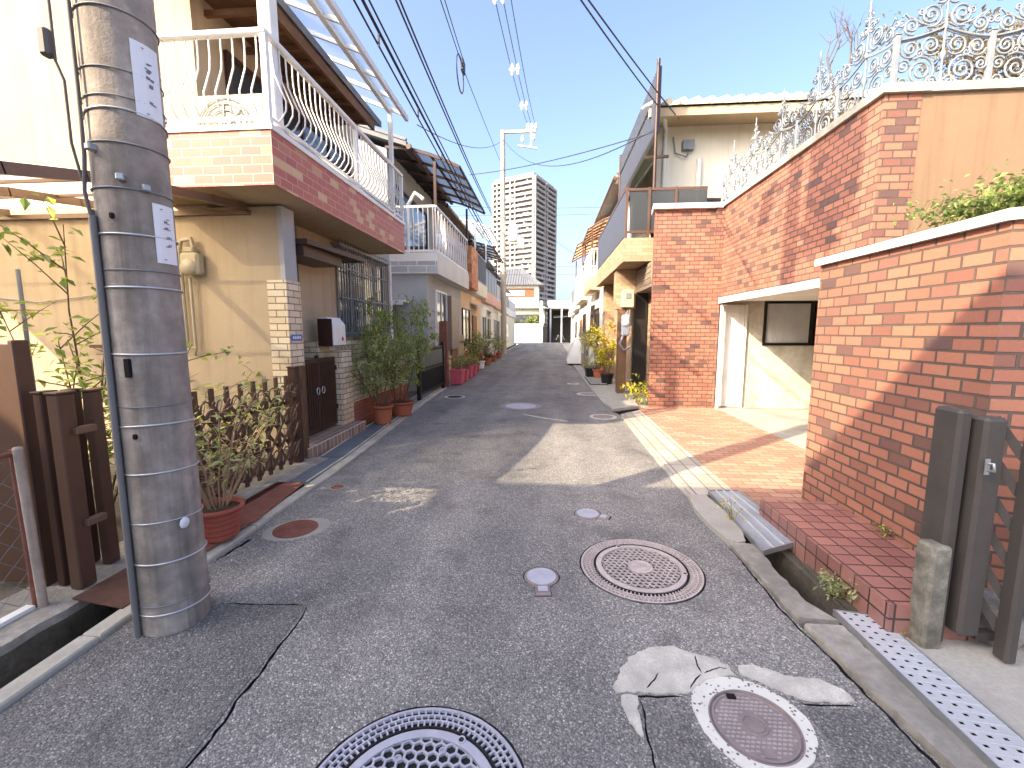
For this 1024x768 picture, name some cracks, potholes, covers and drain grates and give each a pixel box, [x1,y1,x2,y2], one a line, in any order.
drain grate [708,489,794,555]
manhole cover [315,706,525,768]
manhole cover [579,539,706,605]
manhole cover [499,402,542,410]
manhole cover [691,677,818,768]
utility cover [523,567,560,597]
crack [186,603,307,768]
crack [638,549,941,768]
manhole cover [262,518,331,541]
utility cover [574,508,611,520]
